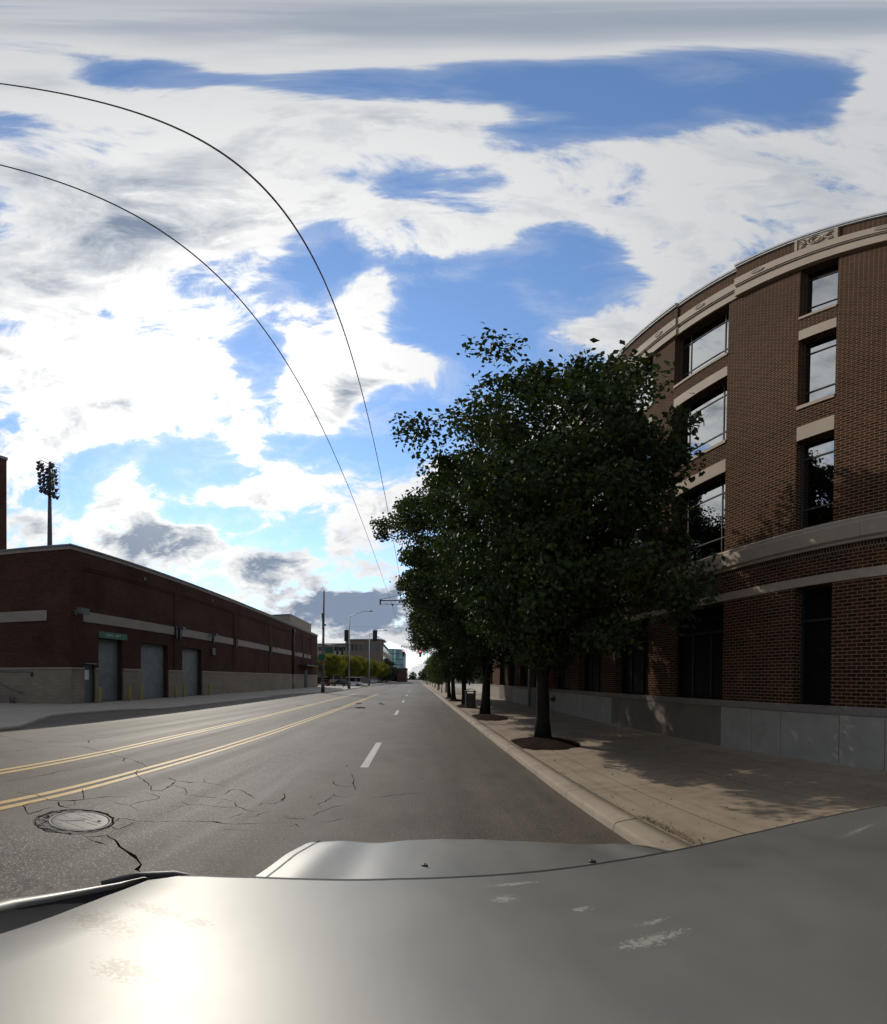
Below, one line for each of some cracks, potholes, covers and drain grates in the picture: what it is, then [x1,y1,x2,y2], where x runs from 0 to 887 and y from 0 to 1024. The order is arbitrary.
manhole cover [33,809,114,835]
crack [9,746,355,872]
